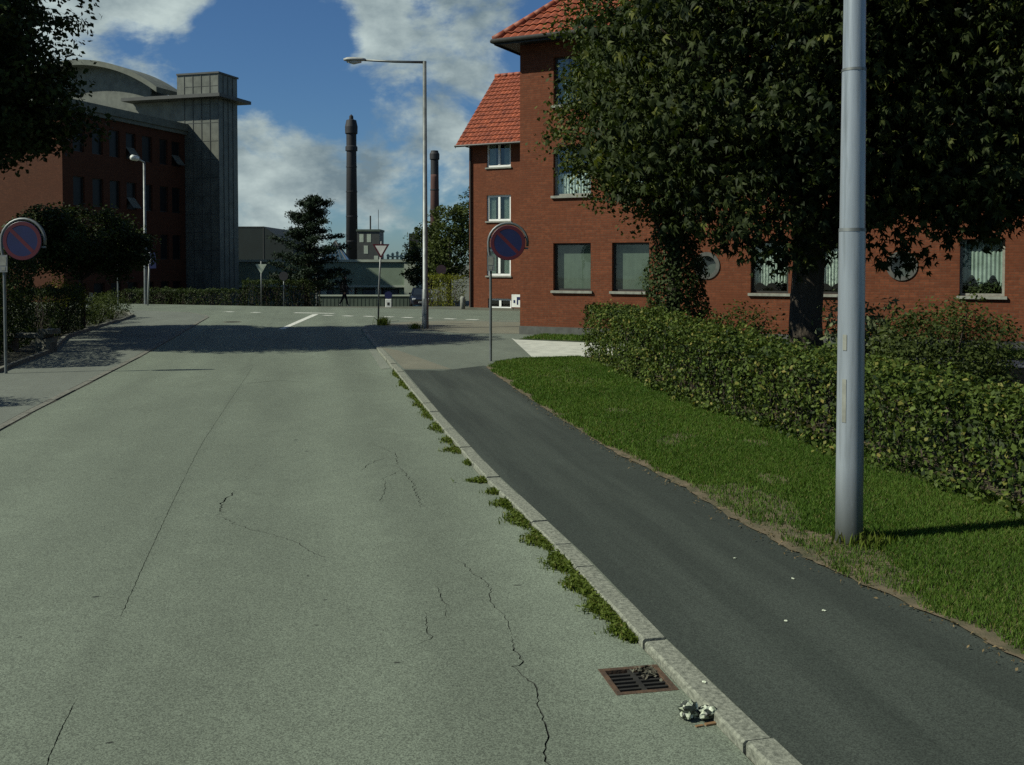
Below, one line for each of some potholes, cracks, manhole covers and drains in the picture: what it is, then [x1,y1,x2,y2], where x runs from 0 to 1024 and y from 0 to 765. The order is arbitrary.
drain grate [598,664,679,696]
crack [217,491,337,559]
crack [411,584,449,646]
crack [120,371,250,618]
crack [47,700,77,765]
crack [456,559,550,765]
